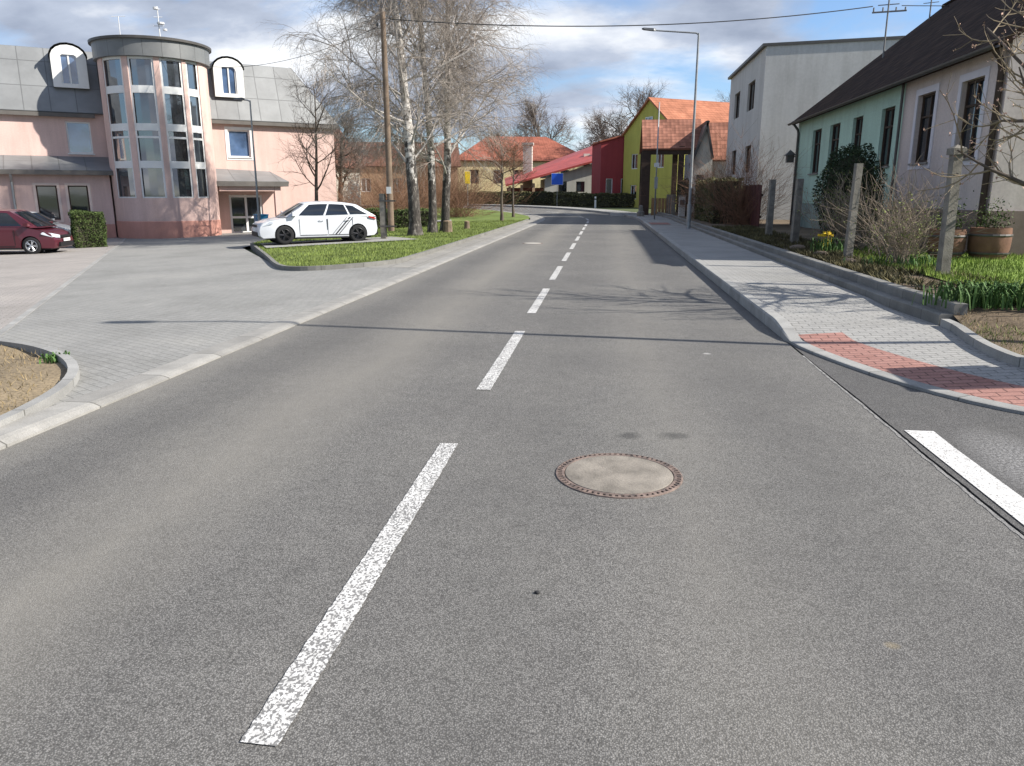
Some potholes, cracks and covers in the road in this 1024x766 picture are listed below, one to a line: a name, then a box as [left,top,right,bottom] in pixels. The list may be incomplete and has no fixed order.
manhole cover [556,453,683,499]
